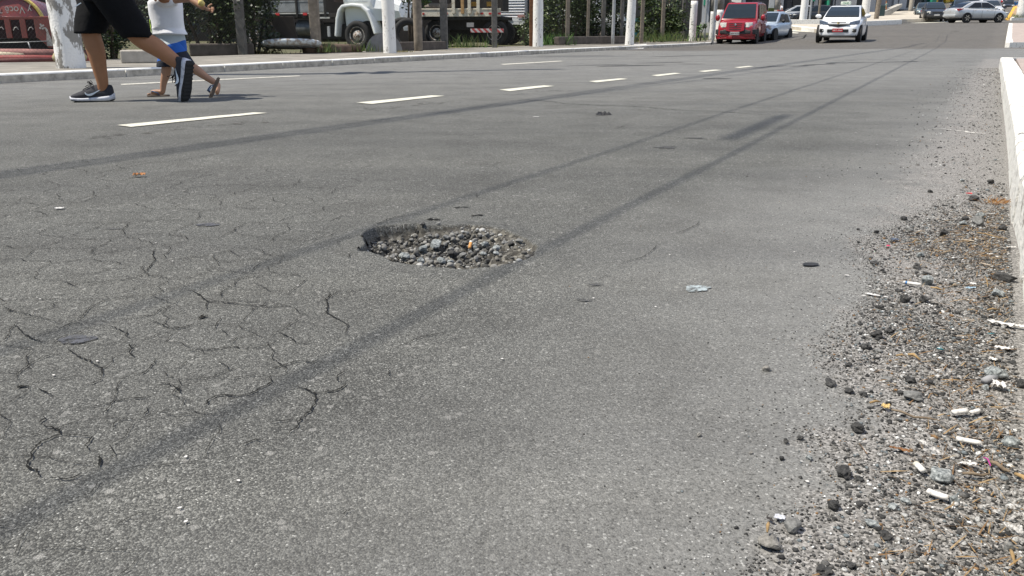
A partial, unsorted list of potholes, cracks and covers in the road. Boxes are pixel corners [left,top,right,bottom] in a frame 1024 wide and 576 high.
crack [0,155,418,576]
pothole [334,220,561,278]
